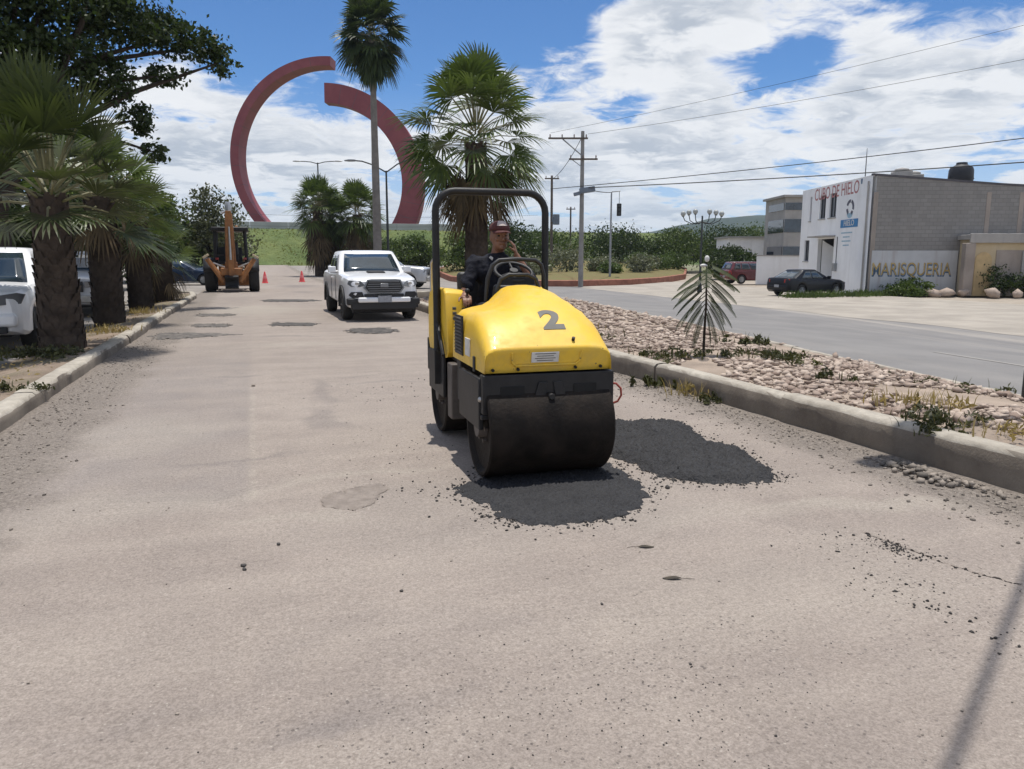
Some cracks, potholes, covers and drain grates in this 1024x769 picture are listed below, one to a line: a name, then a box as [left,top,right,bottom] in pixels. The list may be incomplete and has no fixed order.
crack [864,532,1020,584]
